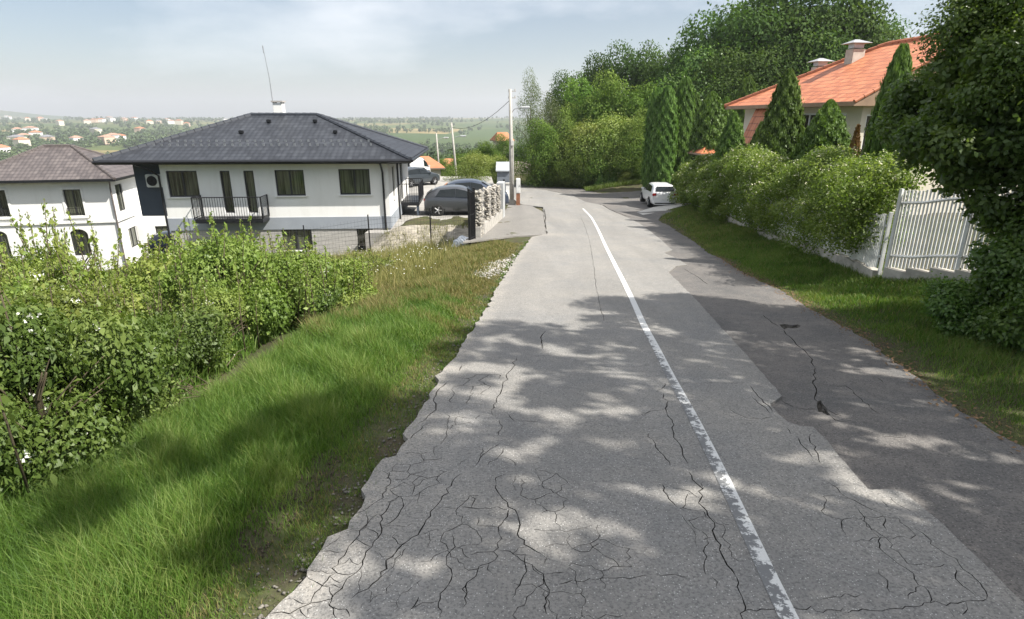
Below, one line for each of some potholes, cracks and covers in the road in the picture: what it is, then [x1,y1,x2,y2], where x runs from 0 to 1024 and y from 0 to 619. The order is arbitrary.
crack [641,385,988,619]
crack [731,370,844,421]
crack [270,358,643,619]
